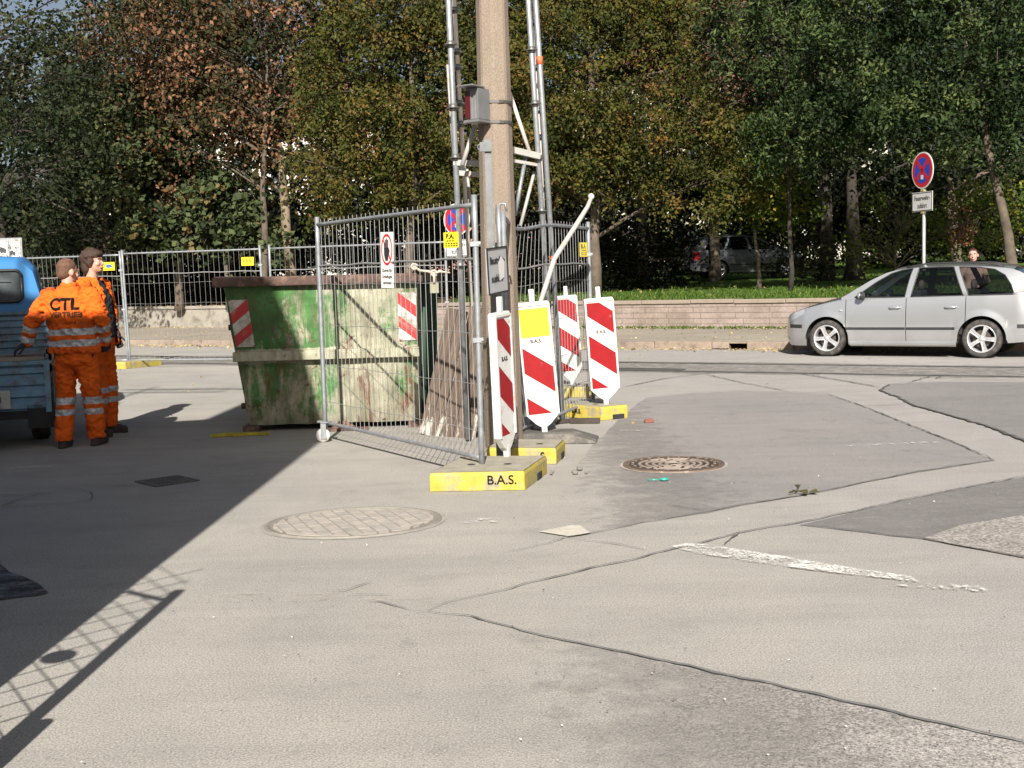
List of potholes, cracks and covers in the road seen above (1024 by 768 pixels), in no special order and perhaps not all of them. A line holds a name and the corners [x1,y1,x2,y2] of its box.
crack [428,476,1022,610]
manhole cover [260,507,446,540]
manhole cover [620,456,728,473]
